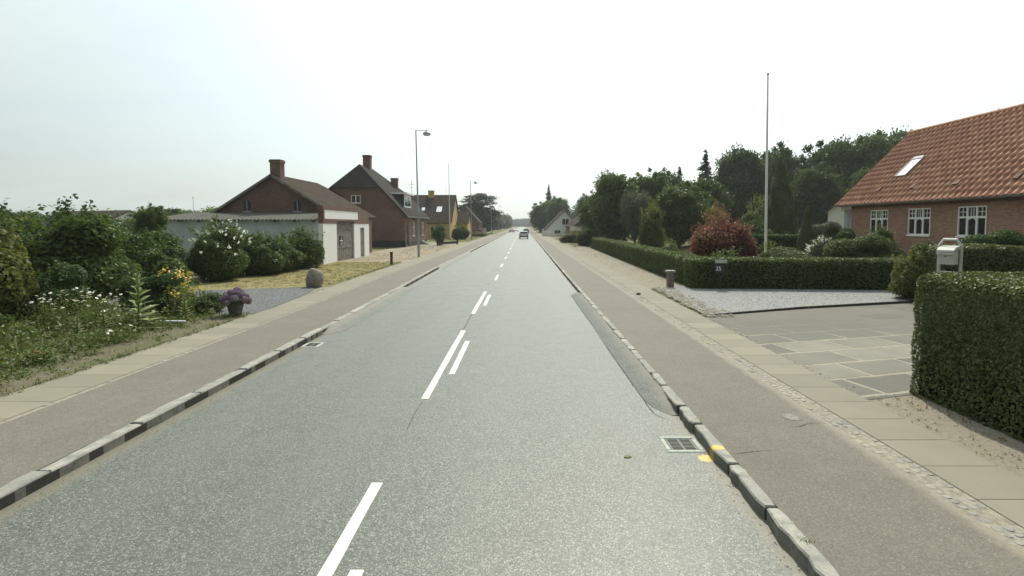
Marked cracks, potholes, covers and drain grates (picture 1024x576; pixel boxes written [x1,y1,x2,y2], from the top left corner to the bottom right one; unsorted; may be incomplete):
drain grate [659,436,706,453]
